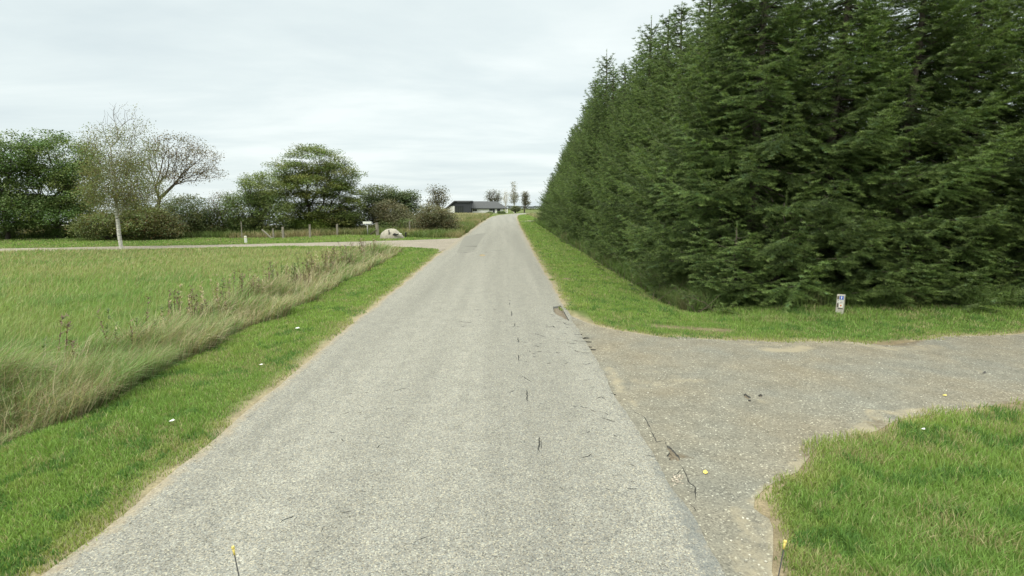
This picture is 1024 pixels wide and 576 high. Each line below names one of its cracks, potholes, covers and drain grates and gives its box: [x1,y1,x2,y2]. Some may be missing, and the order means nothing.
pothole [553,305,569,321]
crack [459,300,596,407]
